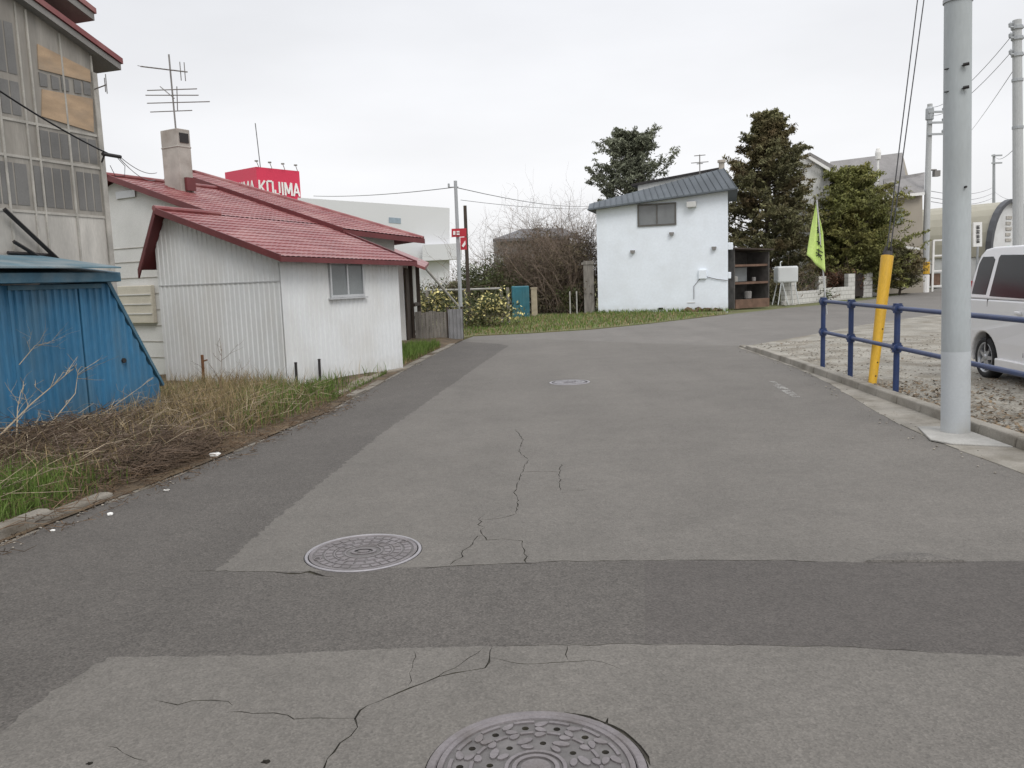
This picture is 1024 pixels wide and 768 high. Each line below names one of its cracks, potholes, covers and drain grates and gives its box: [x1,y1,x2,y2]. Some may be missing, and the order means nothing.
manhole cover [426,711,647,768]
manhole cover [304,534,422,573]
crack [430,431,814,568]
crack [156,643,931,768]
